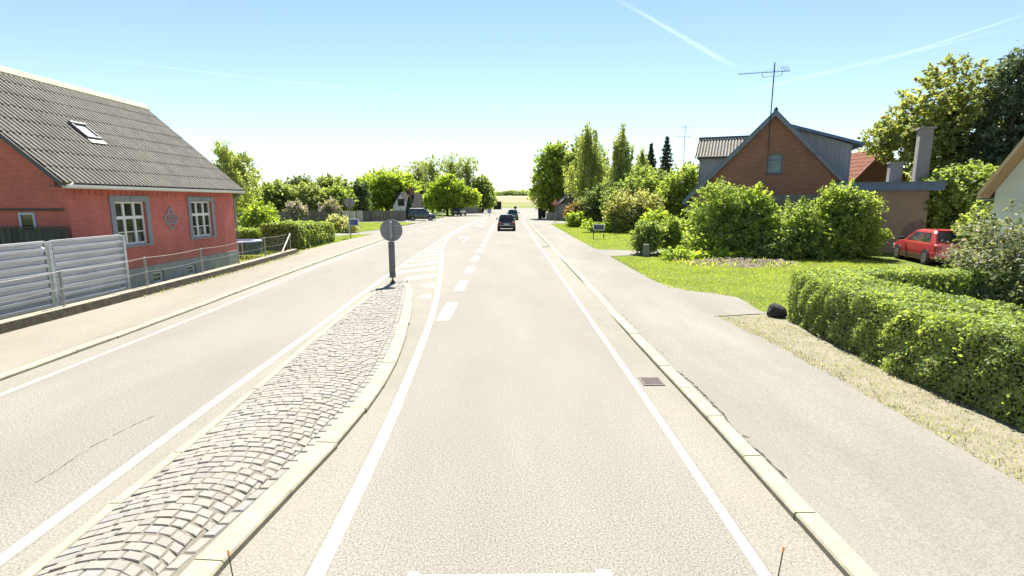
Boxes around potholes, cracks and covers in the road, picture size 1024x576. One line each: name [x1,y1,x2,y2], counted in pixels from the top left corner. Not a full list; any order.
drain grate [638,377,665,386]
